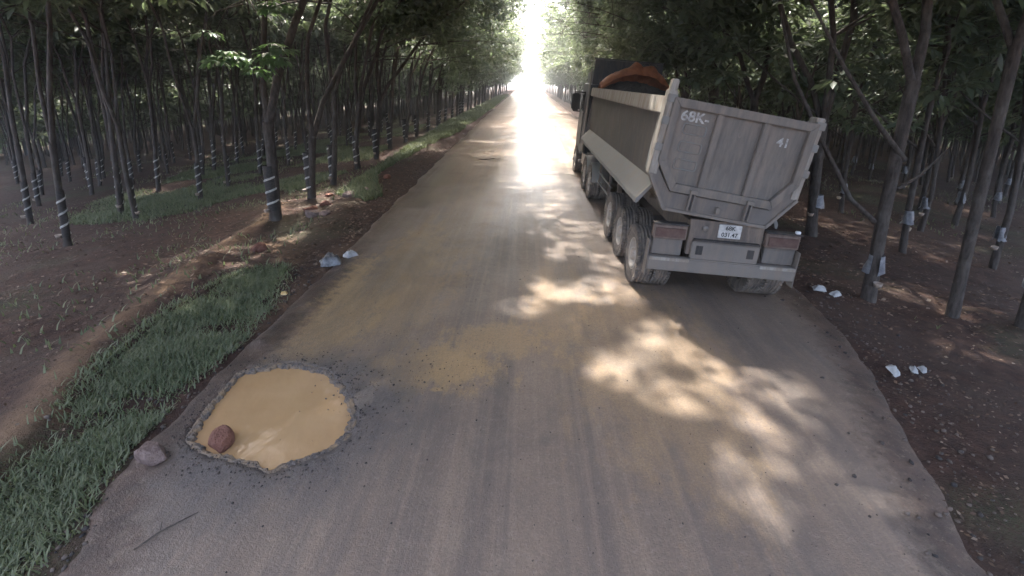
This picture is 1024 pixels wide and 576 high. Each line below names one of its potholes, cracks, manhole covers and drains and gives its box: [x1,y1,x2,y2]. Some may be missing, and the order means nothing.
pothole [185,362,358,474]
